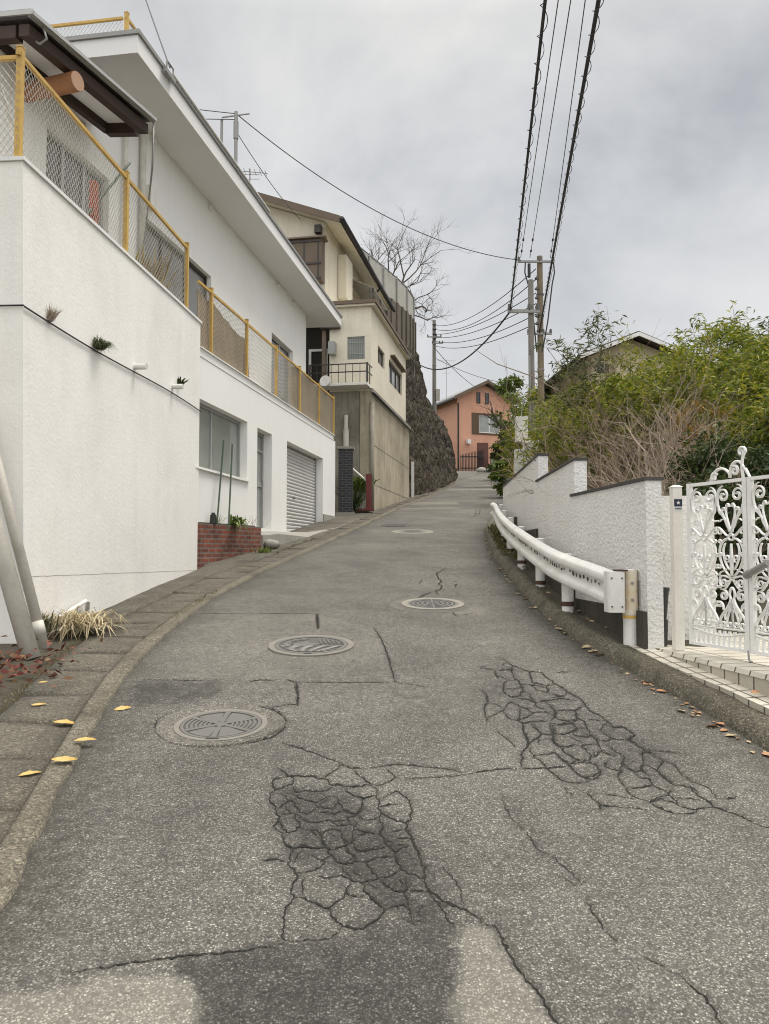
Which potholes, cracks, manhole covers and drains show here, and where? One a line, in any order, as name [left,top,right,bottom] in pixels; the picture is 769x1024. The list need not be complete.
crack [418,568,457,598]
manhole cover [155,704,286,748]
manhole cover [268,635,354,657]
crack [375,630,425,687]
crack [65,658,769,1024]
manhole cover [389,597,471,613]
